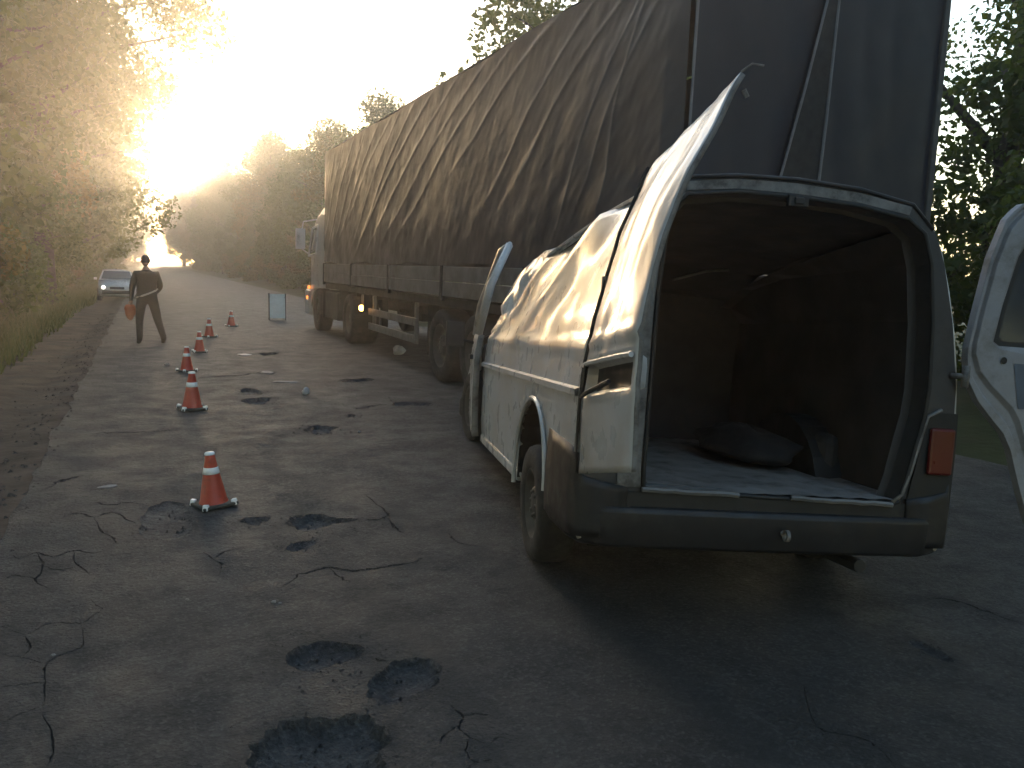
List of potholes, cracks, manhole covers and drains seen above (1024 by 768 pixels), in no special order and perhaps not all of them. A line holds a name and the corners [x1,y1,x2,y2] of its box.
crack [0,599,103,765]
pothole [303,425,339,435]
pothole [241,397,271,405]
crack [440,701,513,768]
crack [7,476,138,588]
pothole [286,514,359,532]
pothole [138,501,196,540]
crack [365,494,404,533]
pothole [238,516,271,525]
pothole [286,540,316,552]
pothole [245,713,393,768]
crack [802,682,894,764]
